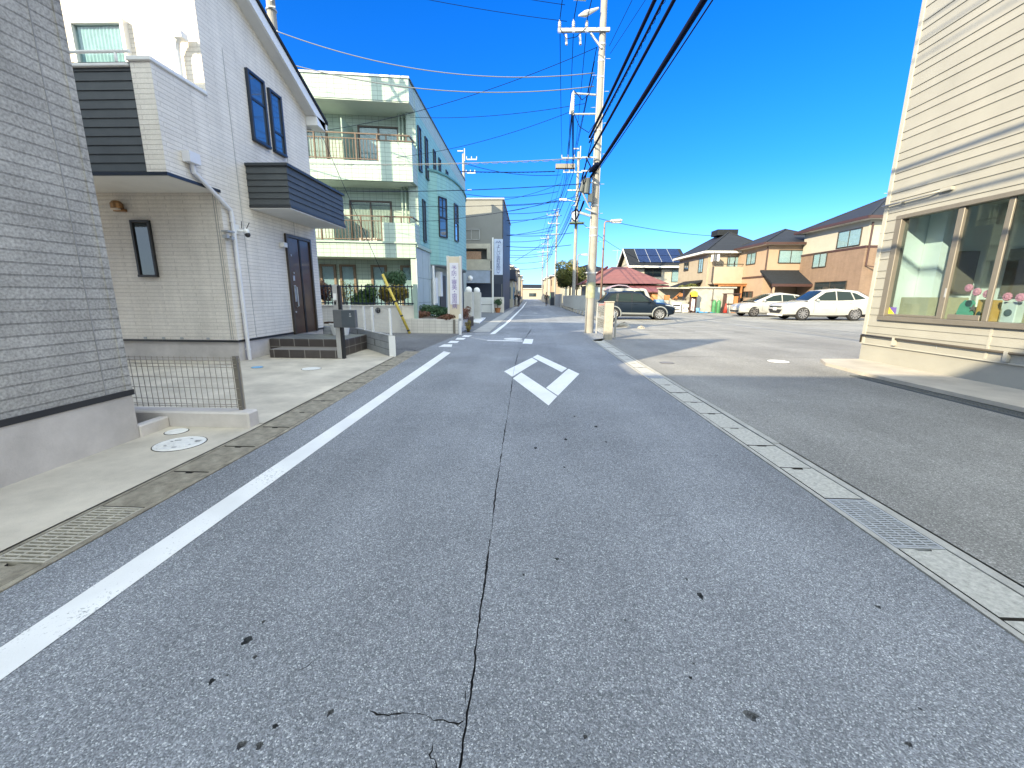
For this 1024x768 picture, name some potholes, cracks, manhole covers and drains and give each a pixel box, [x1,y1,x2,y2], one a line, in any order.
drain grate [826,499,946,551]
drain grate [0,506,143,566]
manhole cover [151,436,208,452]
pothole [743,710,760,722]
